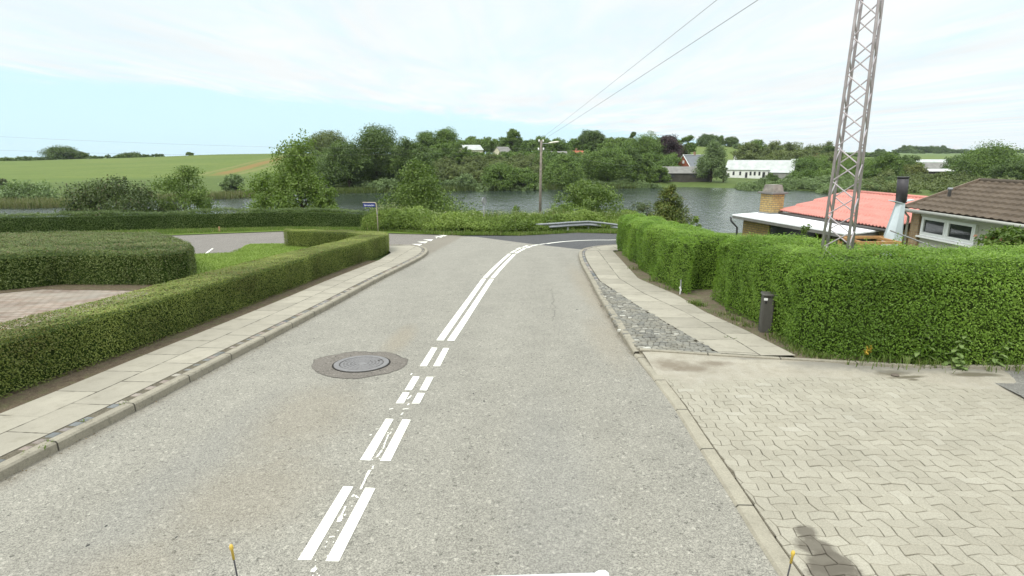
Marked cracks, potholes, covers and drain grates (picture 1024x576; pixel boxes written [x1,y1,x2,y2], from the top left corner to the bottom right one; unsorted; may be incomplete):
manhole cover [332,355,391,373]
